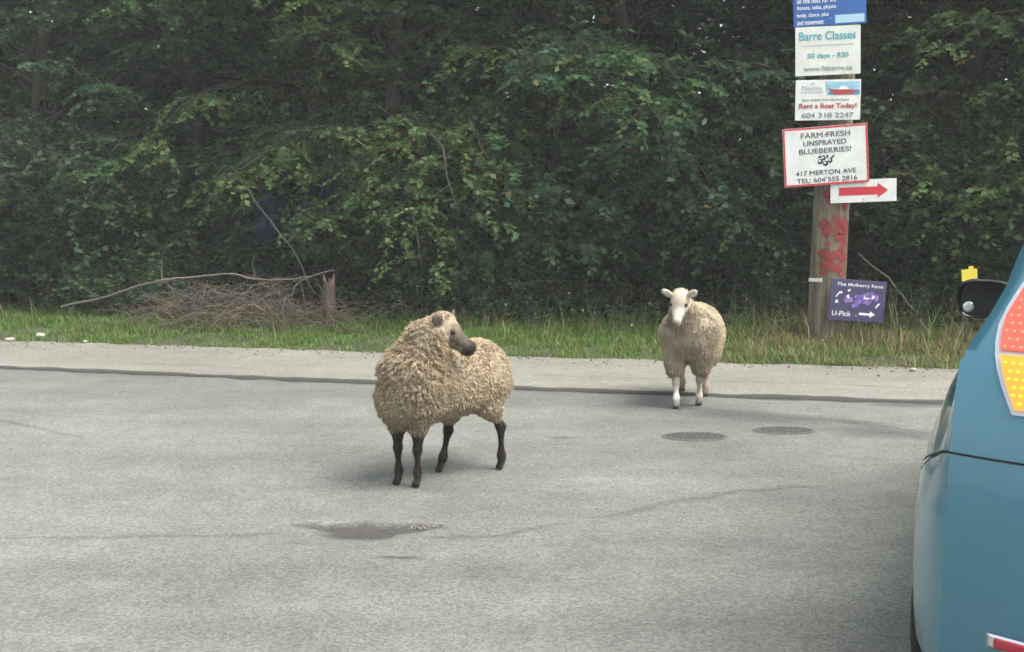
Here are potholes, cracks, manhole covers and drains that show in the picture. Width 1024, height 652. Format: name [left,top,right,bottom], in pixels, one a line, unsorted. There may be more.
manhole cover [661,432,728,441]
manhole cover [752,426,816,435]
